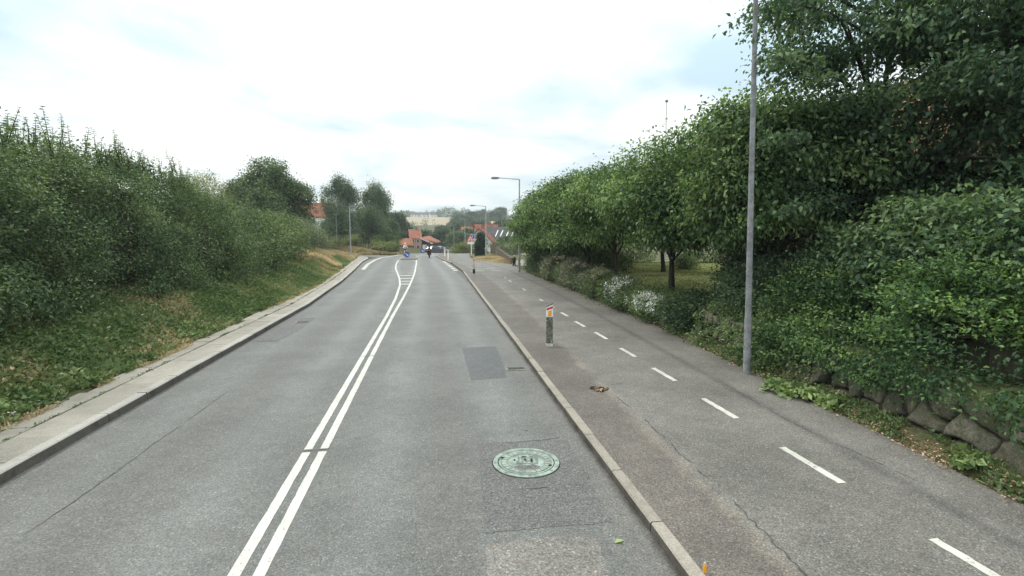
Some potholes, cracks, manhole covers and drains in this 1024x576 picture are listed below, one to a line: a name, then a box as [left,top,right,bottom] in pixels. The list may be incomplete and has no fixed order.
crack [611,383,808,576]
manhole cover [492,448,560,478]
pothole [584,385,615,394]
